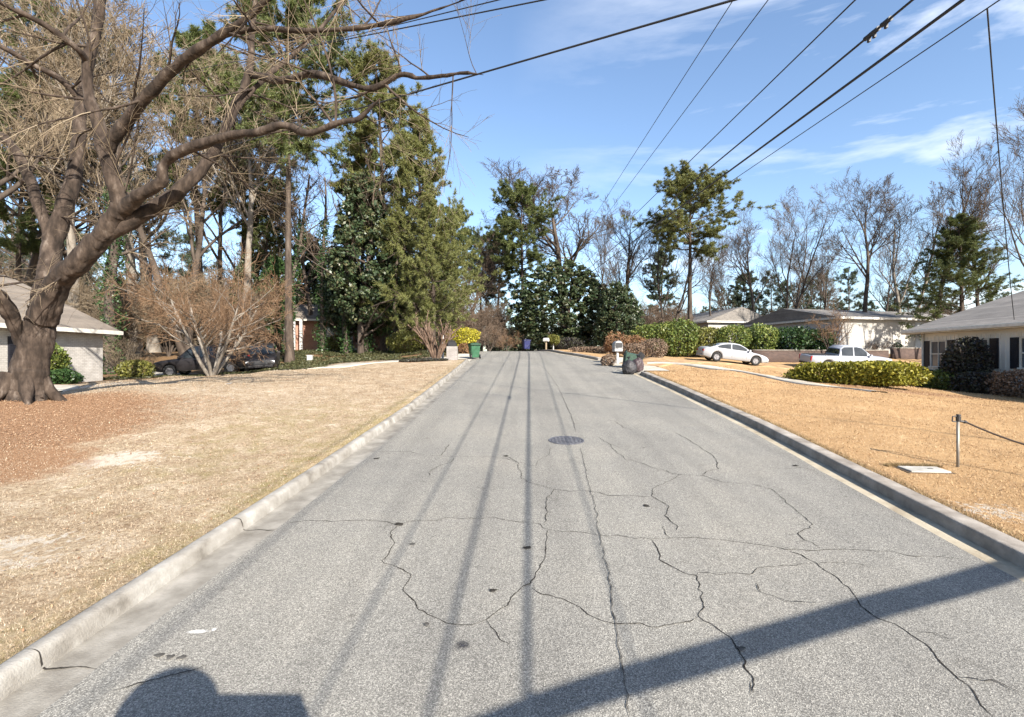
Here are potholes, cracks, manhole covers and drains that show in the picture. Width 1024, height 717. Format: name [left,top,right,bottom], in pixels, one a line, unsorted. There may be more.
crack [289,421,1021,715]
manhole cover [548,436,584,445]
